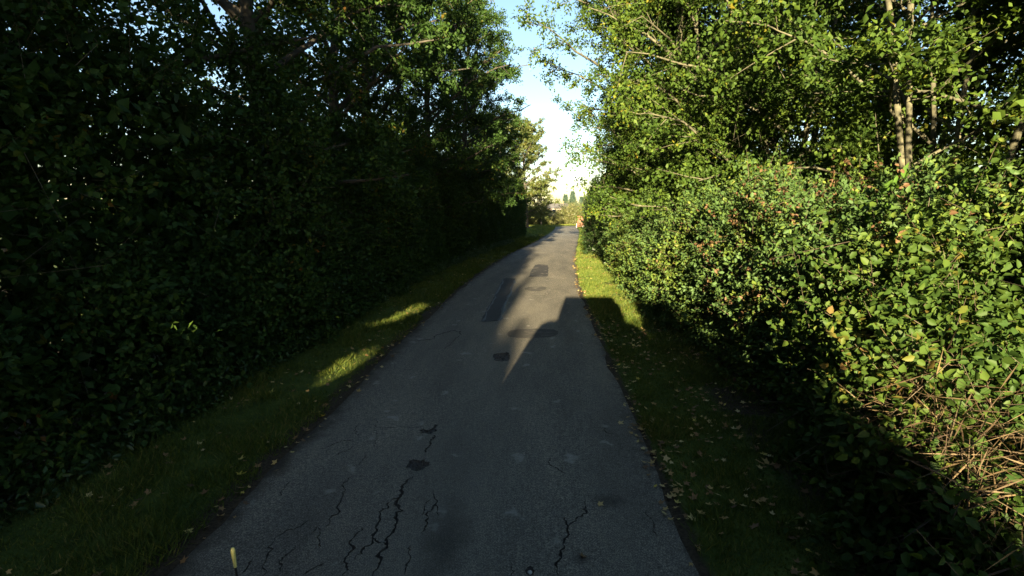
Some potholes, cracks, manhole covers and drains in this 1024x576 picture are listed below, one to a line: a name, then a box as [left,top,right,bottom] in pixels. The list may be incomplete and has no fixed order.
crack [242,421,438,576]
pothole [493,352,510,362]
crack [554,502,588,575]
